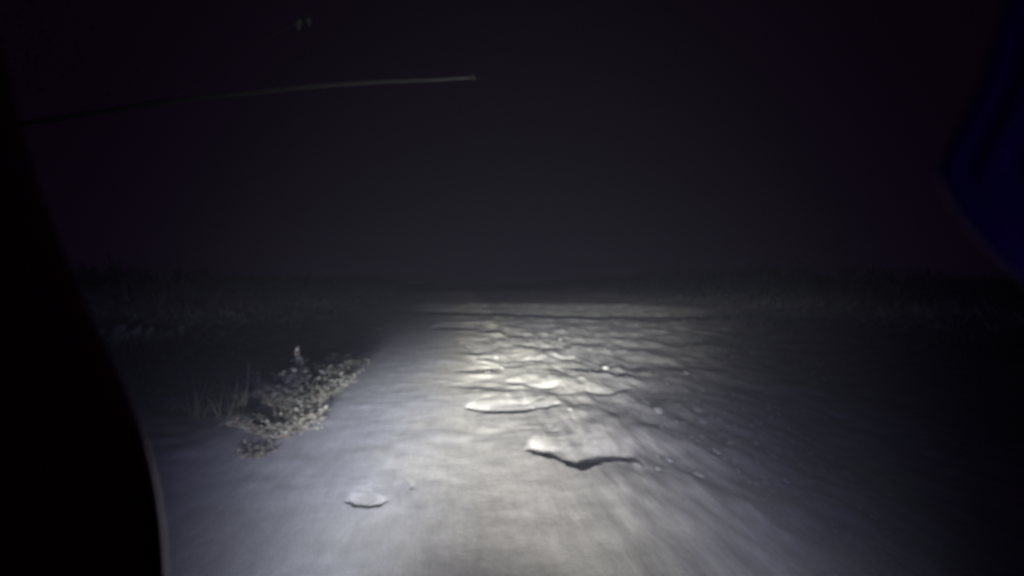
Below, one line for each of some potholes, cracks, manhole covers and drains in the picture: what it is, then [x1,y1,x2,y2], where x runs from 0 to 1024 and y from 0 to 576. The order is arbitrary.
pothole [508,409,667,477]
pothole [450,386,577,417]
